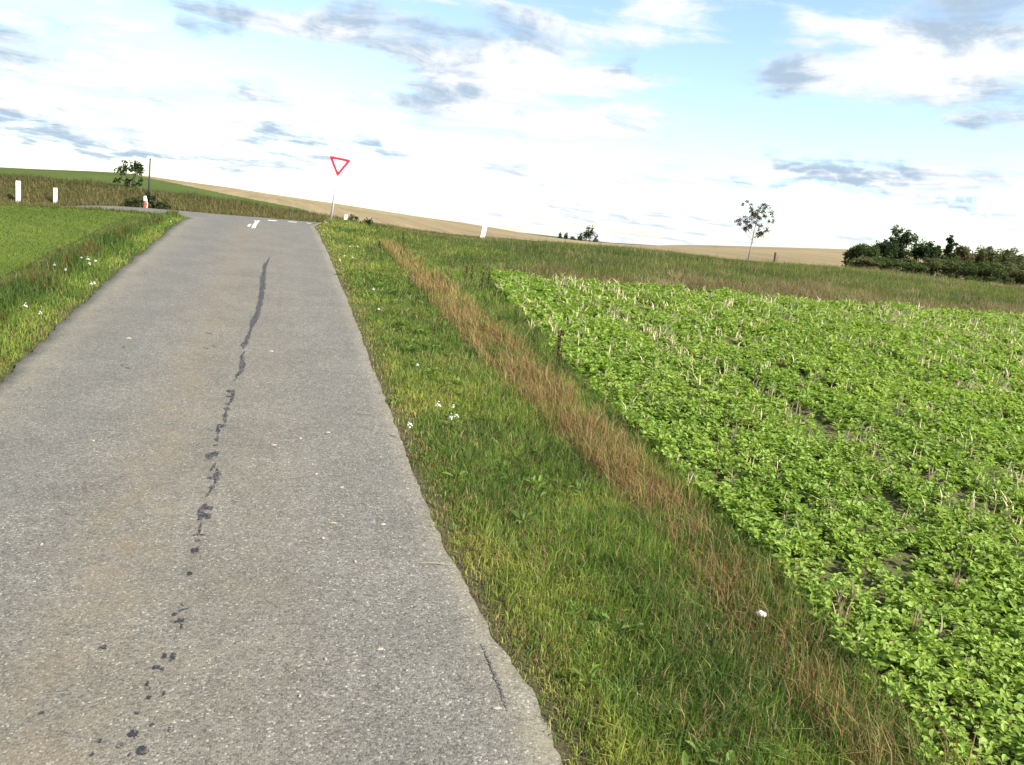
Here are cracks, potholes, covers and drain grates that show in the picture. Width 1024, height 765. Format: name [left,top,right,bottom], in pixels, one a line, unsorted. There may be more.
crack [481,643,509,711]
